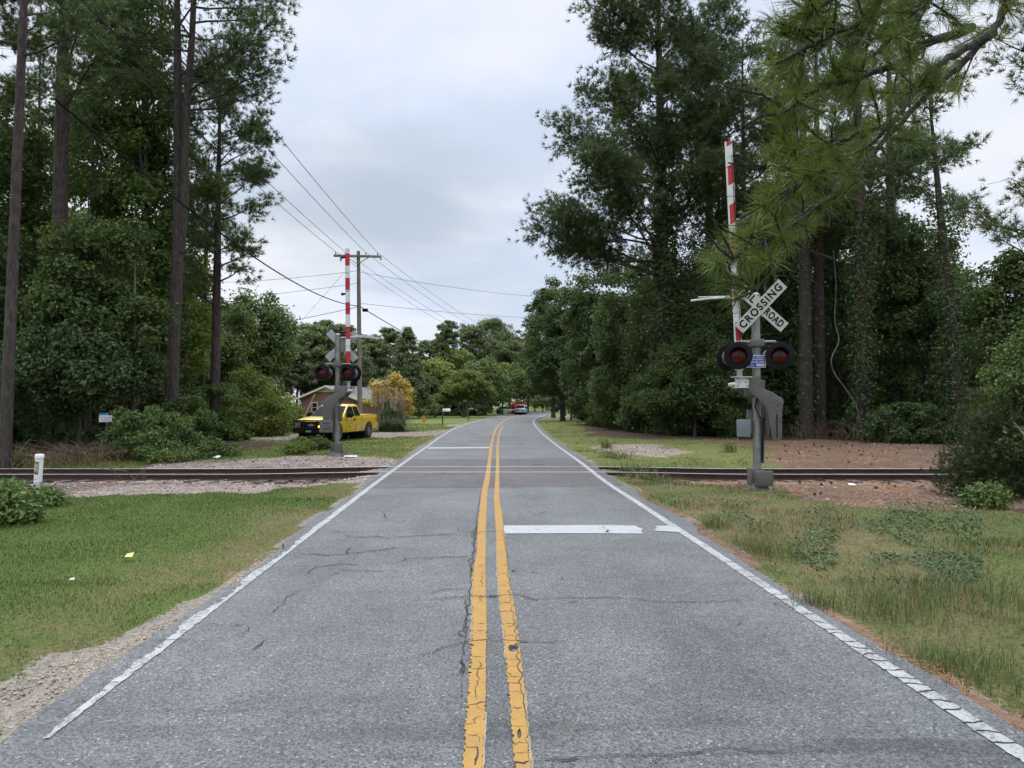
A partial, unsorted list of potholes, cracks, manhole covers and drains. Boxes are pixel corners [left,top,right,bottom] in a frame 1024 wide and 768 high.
crack [272,498,1016,765]
